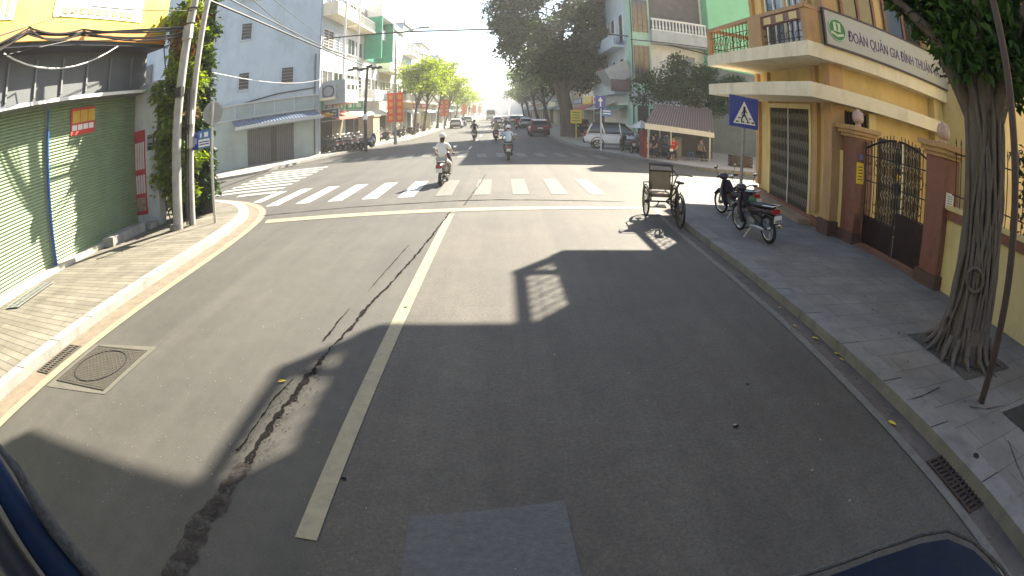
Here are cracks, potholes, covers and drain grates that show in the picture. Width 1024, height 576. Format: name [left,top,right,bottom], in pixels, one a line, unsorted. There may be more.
drain grate [37,344,81,374]
manhole cover [47,344,157,394]
crack [322,309,349,341]
crack [235,378,294,451]
drain grate [926,455,984,513]
